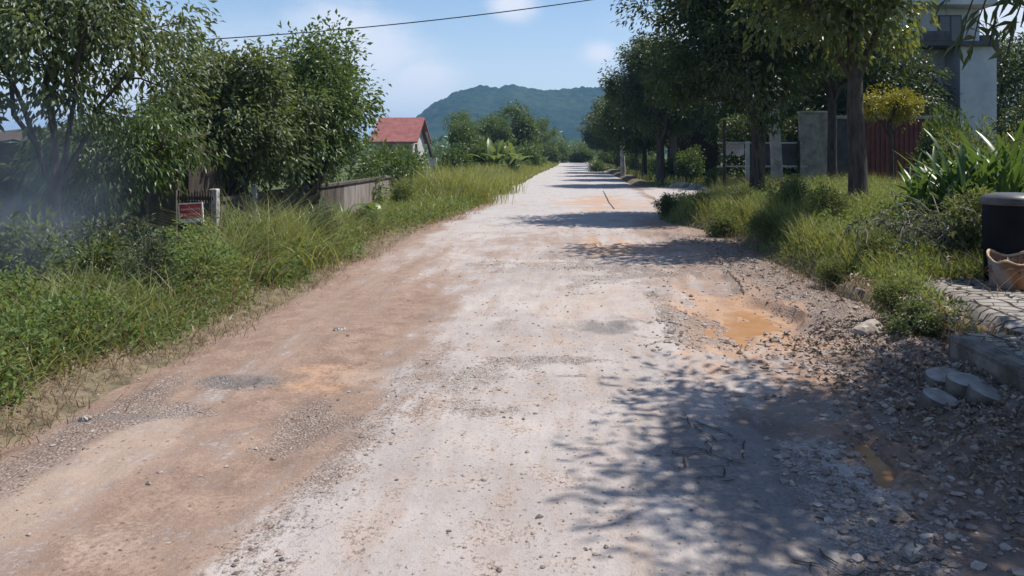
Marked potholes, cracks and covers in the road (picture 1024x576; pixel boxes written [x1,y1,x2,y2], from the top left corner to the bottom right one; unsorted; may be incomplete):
pothole [832,425,913,489]
pothole [667,270,832,360]
crack [666,414,745,481]
